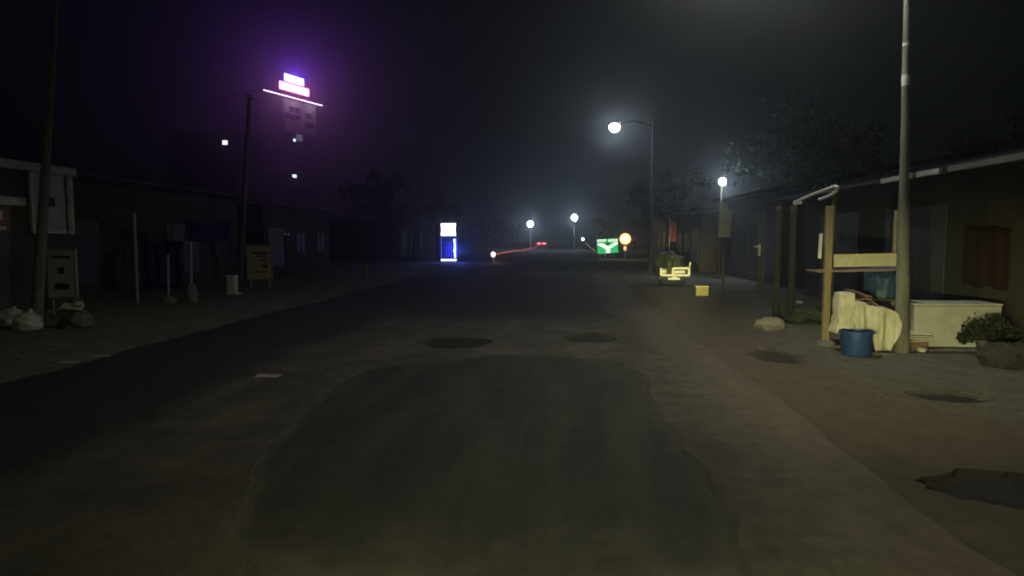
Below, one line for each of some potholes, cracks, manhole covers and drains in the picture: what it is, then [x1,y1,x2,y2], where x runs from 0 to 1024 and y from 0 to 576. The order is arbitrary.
pothole [915,468,1024,510]
pothole [902,389,995,403]
pothole [744,347,809,365]
pothole [420,337,493,349]
pothole [562,333,618,343]
